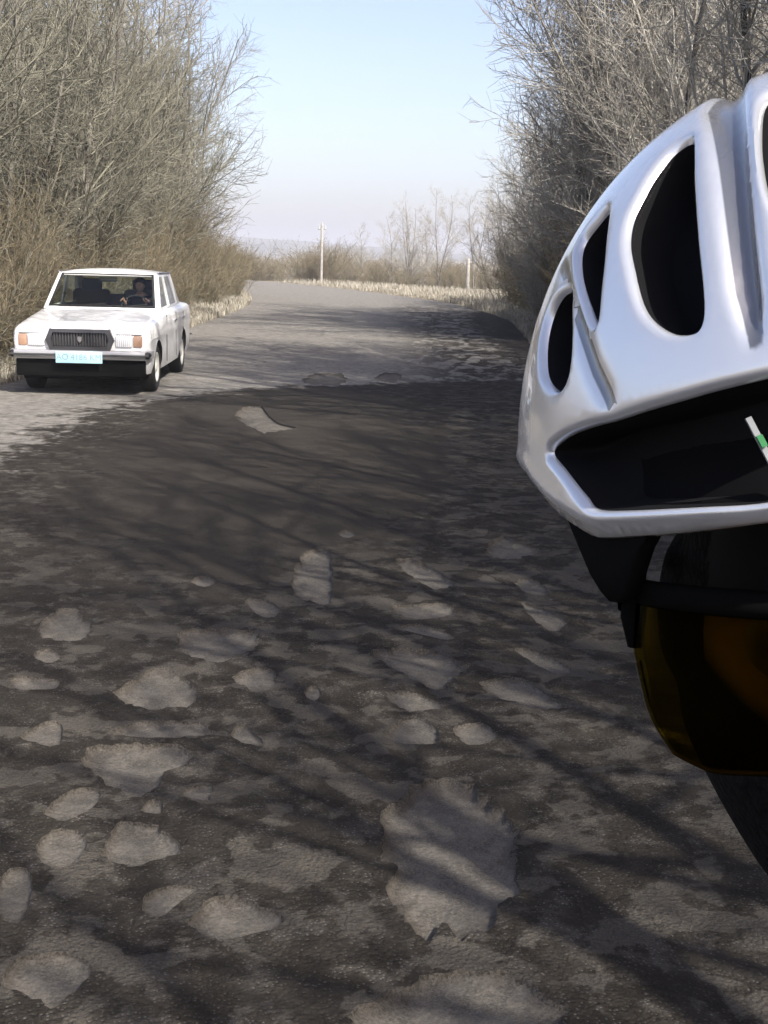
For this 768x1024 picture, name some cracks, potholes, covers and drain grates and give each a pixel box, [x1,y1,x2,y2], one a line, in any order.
pothole [36,828,87,868]
pothole [290,546,333,604]
pothole [302,373,348,386]
pothole [112,667,198,710]
pothole [235,406,296,434]
pothole [99,821,183,867]
pothole [0,951,92,1009]
pothole [43,787,101,821]
pothole [142,884,197,917]
pothole [81,741,193,797]
pothole [184,895,284,940]
pothole [453,722,498,745]
